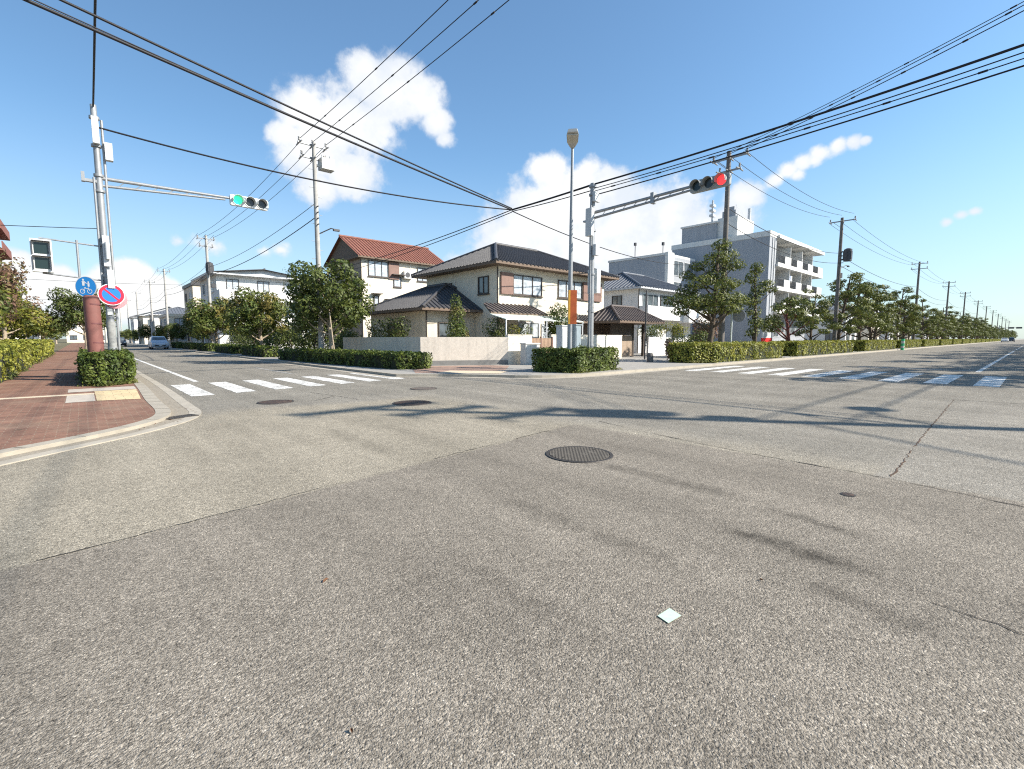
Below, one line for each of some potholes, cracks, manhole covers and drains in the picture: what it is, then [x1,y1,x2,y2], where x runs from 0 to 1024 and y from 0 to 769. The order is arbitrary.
manhole cover [545,446,614,463]
crack [932,602,1024,635]
